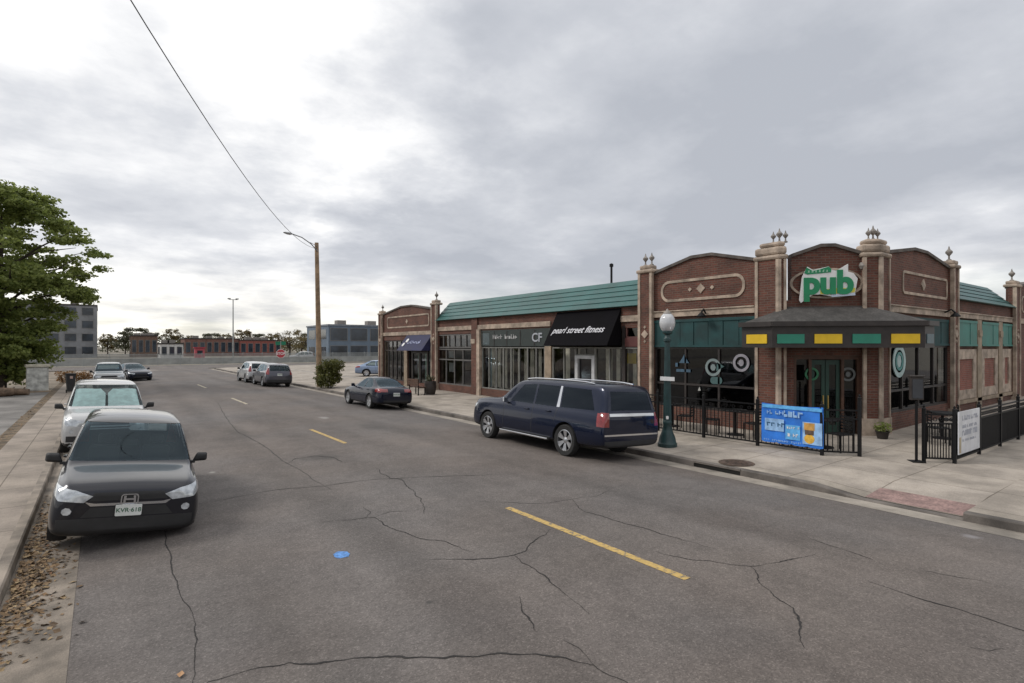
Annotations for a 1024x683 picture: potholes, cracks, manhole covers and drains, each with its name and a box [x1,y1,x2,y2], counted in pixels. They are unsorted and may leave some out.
crack [164,530,198,683]
crack [208,640,628,683]
manhole cover [718,459,755,467]
crack [656,537,868,648]
crack [204,402,586,611]
crack [875,583,1022,630]
